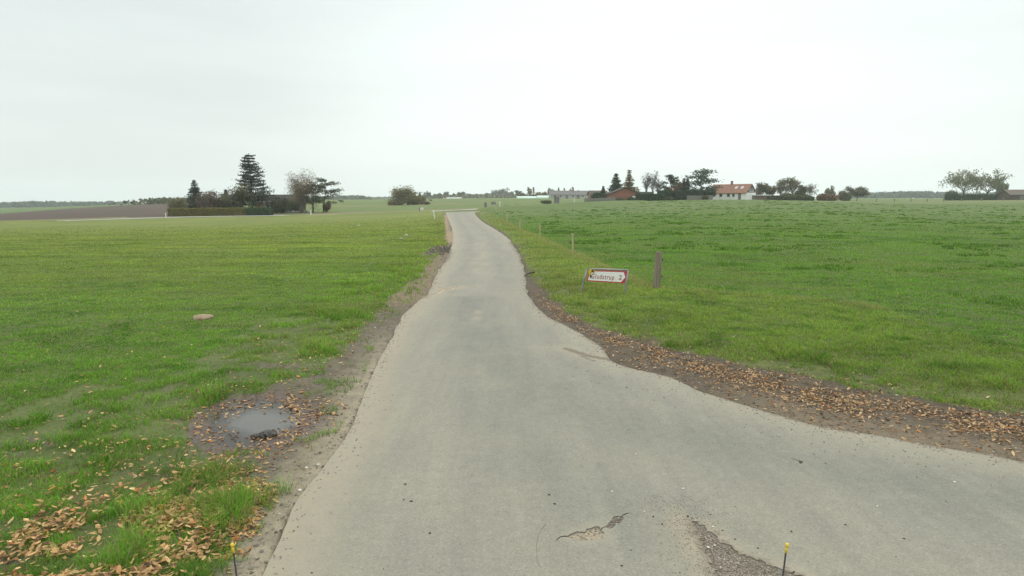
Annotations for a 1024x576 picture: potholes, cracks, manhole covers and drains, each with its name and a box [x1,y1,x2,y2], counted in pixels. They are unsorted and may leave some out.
pothole [606,516,624,529]
pothole [692,522,800,576]
pothole [567,527,604,541]
